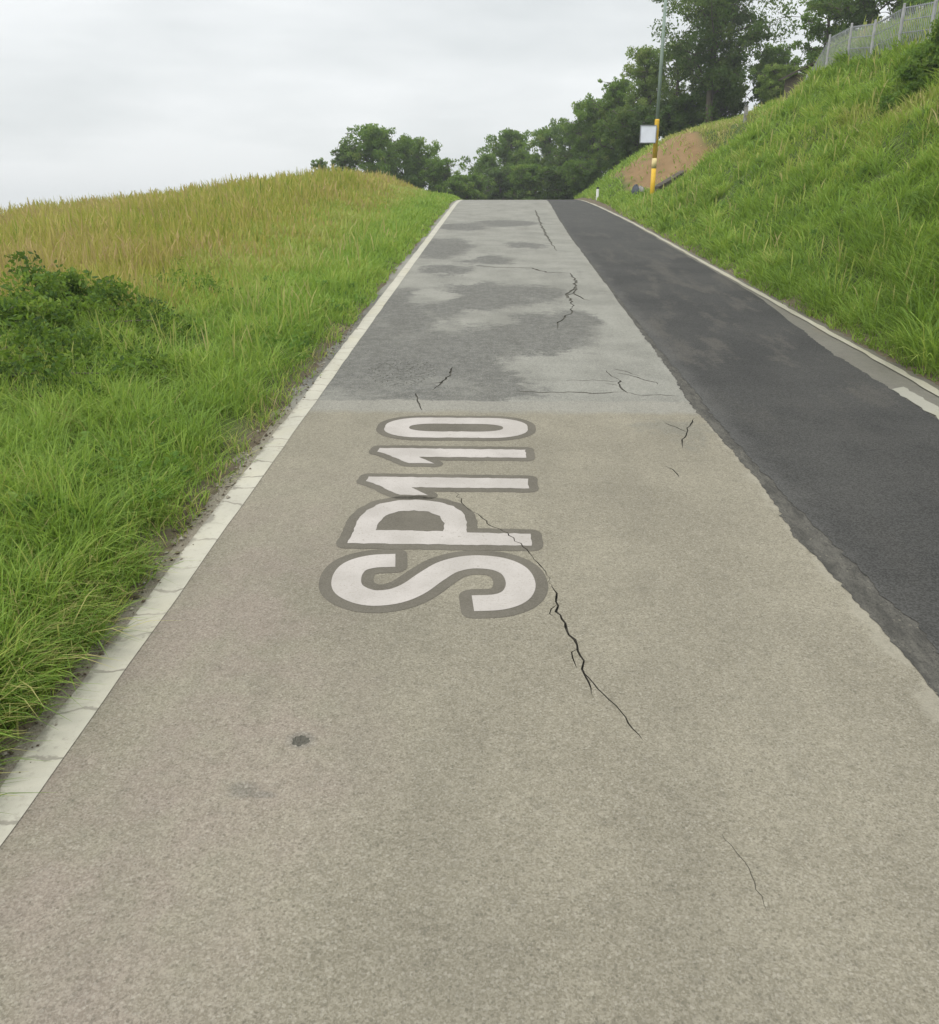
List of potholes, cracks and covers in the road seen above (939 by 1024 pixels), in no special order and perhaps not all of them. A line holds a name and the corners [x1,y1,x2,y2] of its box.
crack [722,834,772,917]
crack [370,360,453,410]
crack [535,210,557,251]
crack [476,265,586,329]
crack [666,420,693,447]
crack [521,369,673,396]
crack [456,494,643,740]
